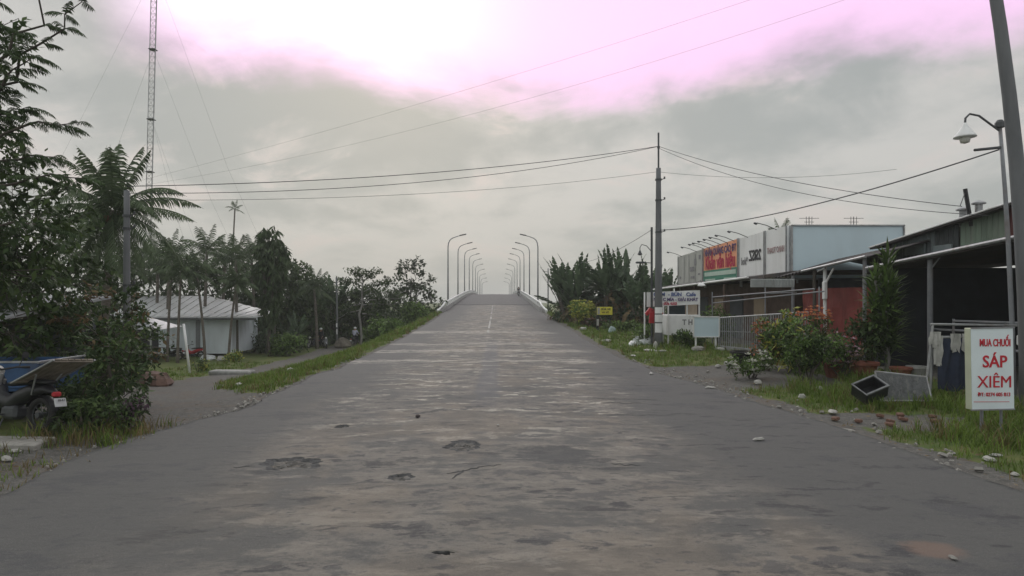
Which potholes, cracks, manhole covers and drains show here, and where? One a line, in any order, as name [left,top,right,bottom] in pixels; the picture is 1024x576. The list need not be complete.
pothole [434,439,489,454]
pothole [377,471,426,484]
pothole [244,455,336,475]
